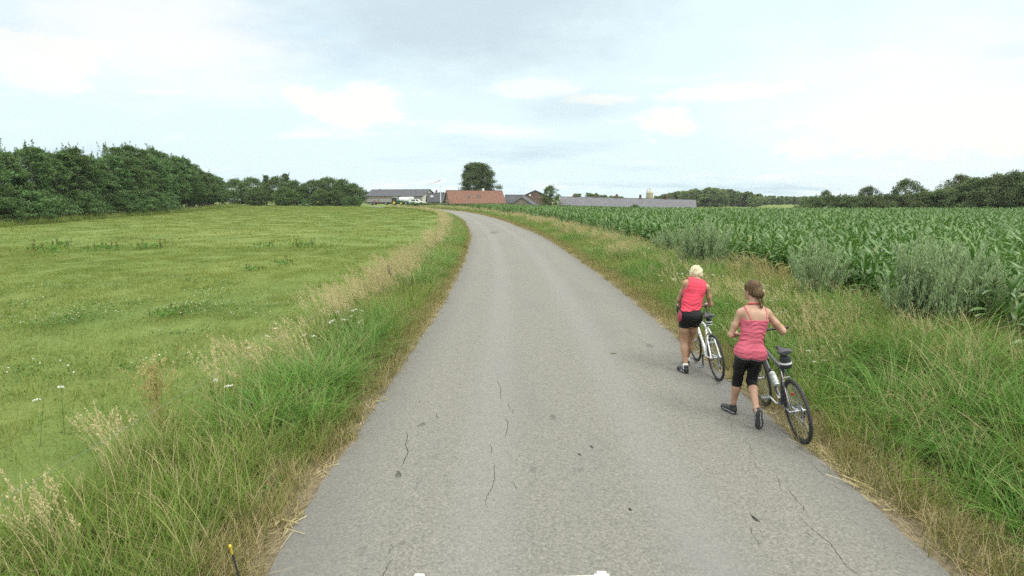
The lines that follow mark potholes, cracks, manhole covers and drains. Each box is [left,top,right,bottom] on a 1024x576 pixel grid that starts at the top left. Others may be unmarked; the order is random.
crack [485,387,511,503]
crack [728,417,859,576]
